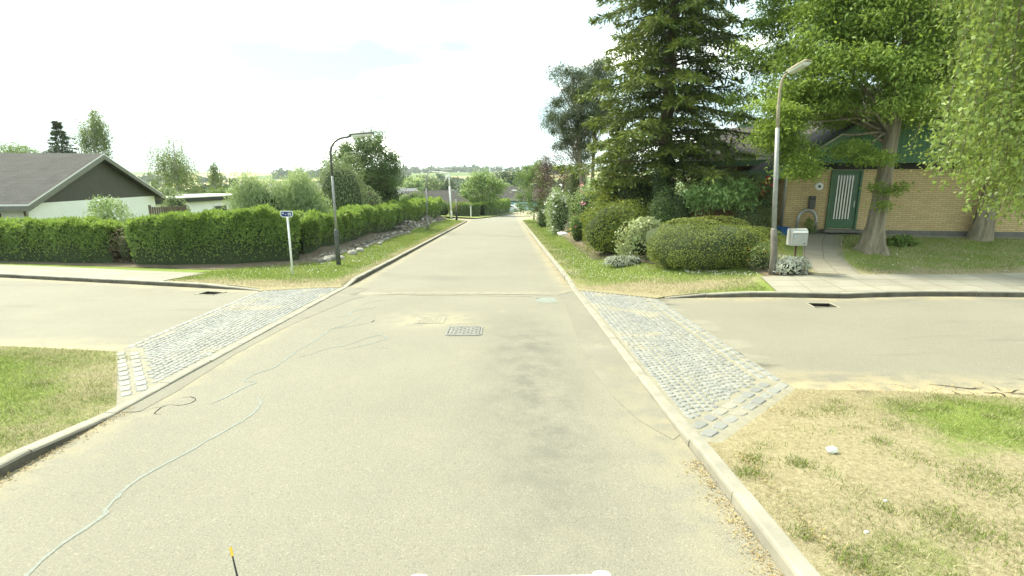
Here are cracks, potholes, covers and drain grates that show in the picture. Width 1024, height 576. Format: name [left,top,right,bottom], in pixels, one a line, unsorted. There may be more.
crack [896,368,1024,397]
